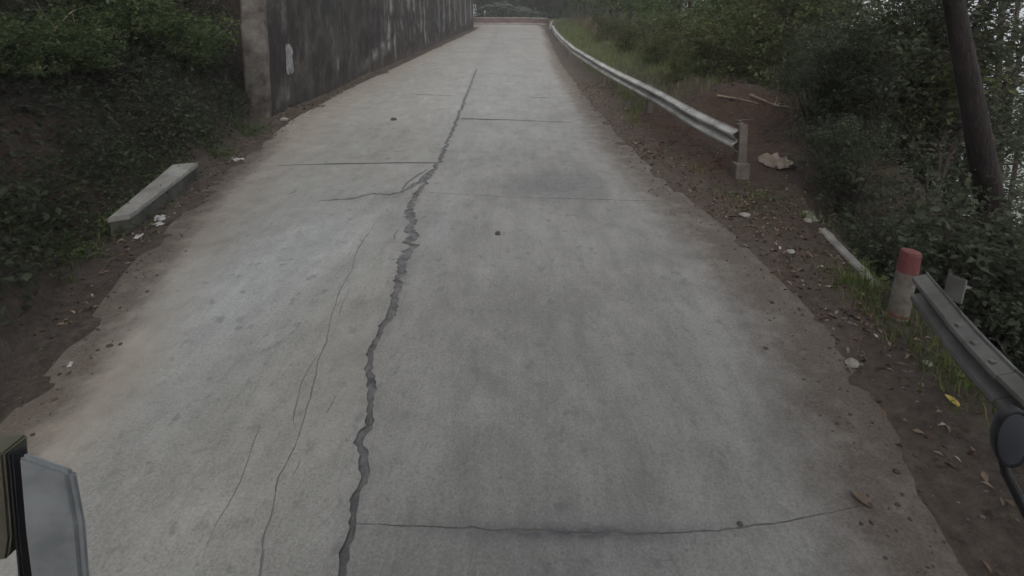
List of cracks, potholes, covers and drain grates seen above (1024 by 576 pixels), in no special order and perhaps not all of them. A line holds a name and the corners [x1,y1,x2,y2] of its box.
crack [202,69,859,576]
